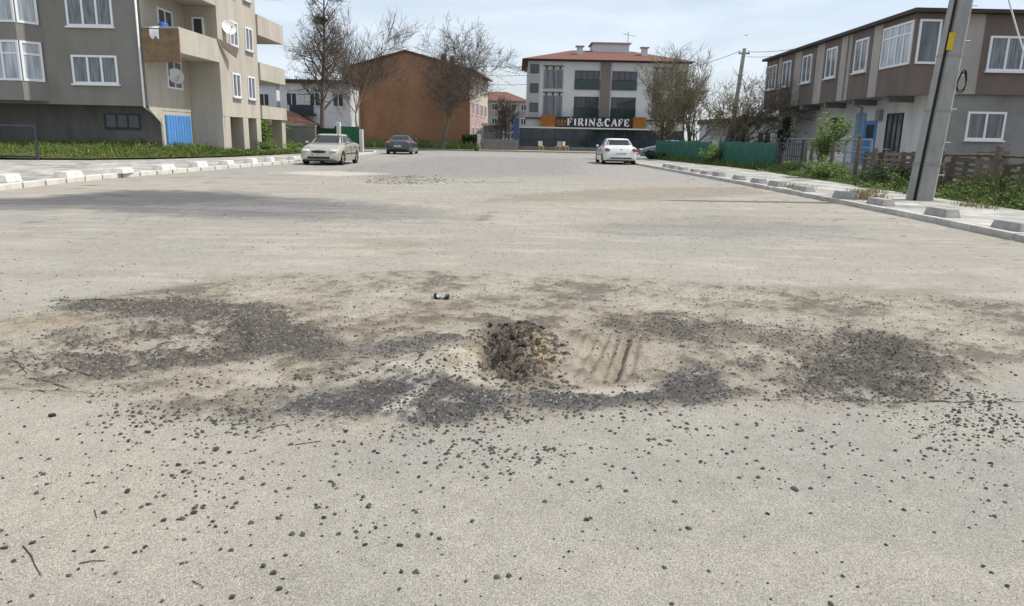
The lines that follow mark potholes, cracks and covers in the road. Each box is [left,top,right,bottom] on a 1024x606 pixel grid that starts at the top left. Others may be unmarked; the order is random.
pothole [473,323,564,389]
